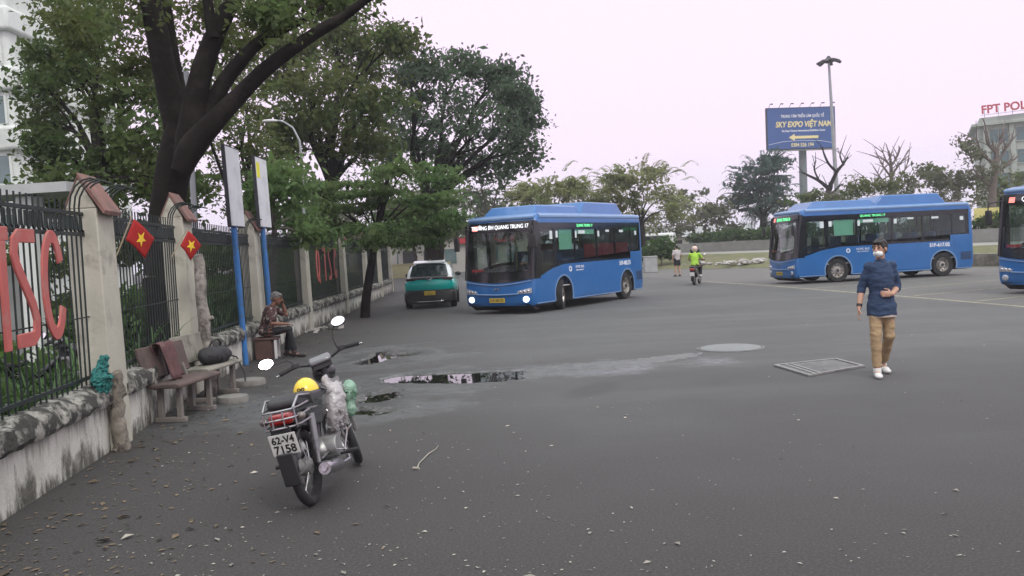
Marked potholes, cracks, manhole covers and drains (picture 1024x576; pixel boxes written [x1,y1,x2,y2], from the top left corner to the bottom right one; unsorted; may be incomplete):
pothole [345,348,424,365]
pothole [355,385,406,402]
manhole cover [696,343,765,352]
